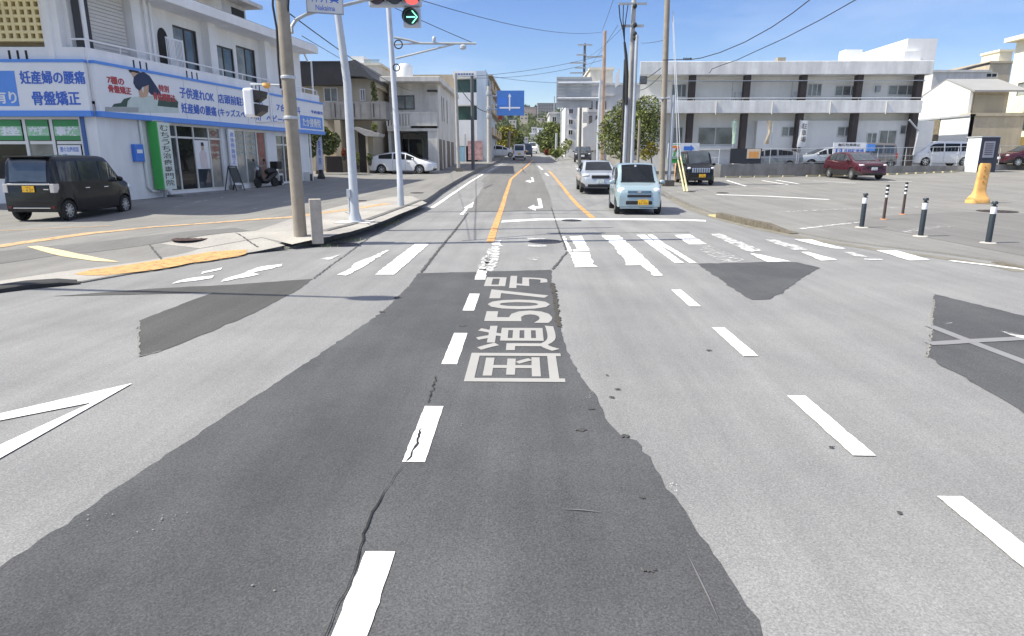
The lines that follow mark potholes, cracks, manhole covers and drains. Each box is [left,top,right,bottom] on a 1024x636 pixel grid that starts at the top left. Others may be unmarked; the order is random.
crack [325,428,421,636]
